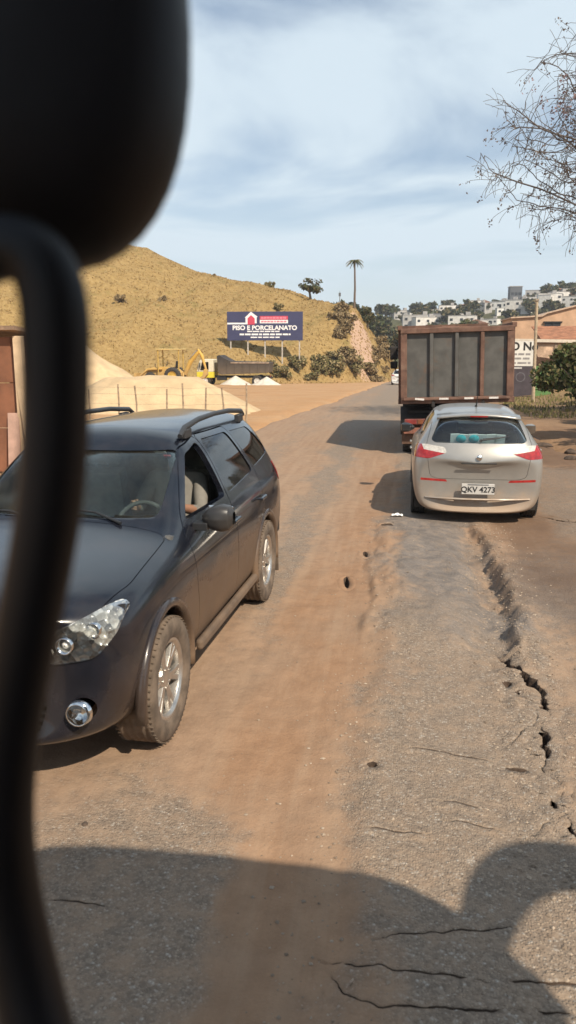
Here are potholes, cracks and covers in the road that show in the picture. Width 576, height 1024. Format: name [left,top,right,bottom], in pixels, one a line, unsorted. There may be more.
crack [43,888,125,919]
crack [531,515,576,525]
crack [311,916,576,1024]
crack [356,646,576,902]
pothole [357,550,374,559]
pothole [337,575,356,591]
pothole [355,756,390,774]
